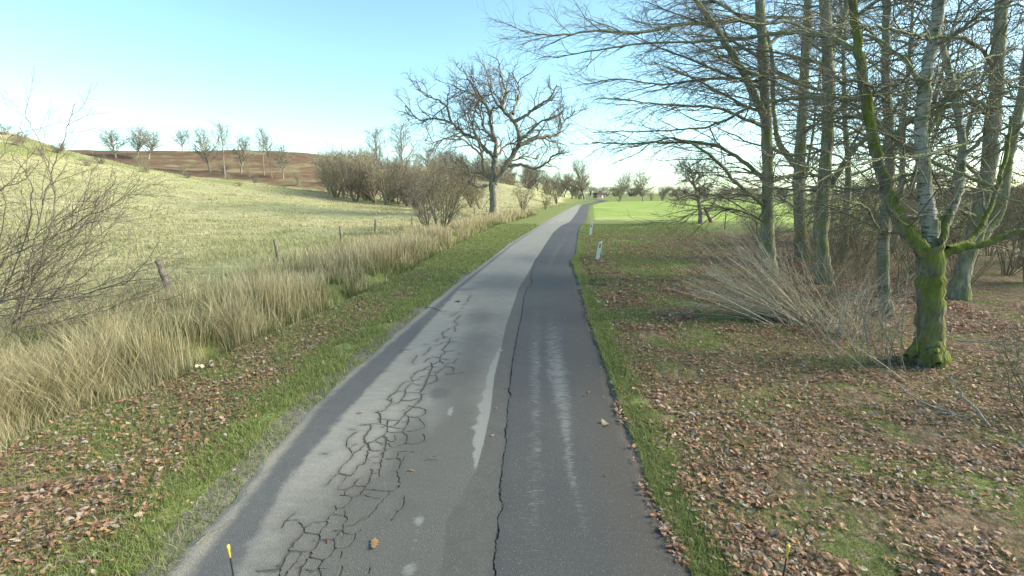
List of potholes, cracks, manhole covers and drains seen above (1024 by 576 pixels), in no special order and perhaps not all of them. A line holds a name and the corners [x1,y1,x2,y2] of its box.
crack [492,262,535,576]
crack [256,297,470,576]
